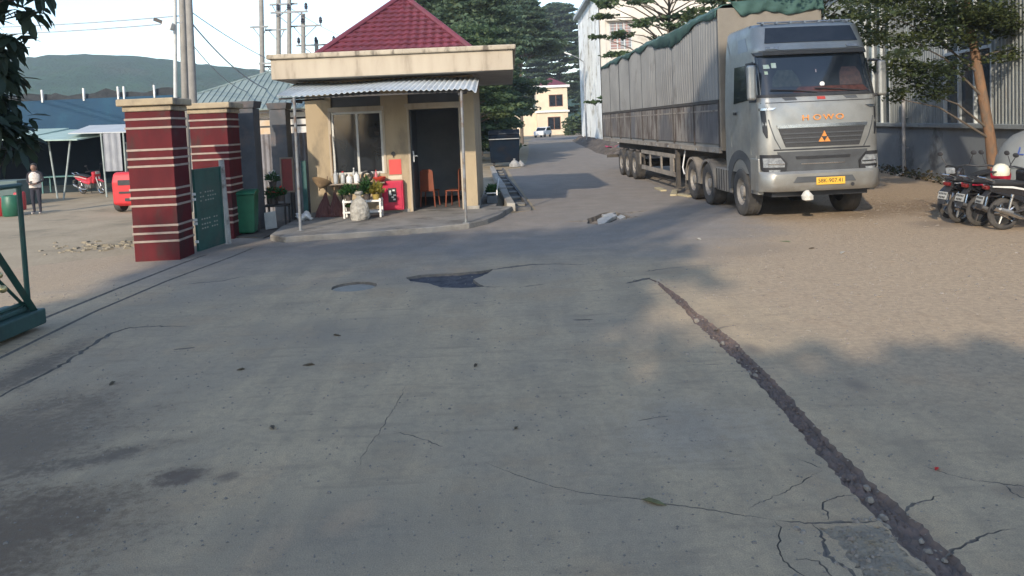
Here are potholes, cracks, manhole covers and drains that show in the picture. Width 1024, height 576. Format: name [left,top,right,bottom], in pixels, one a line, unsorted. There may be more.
crack [356,387,443,470]
pothole [406,269,493,288]
crack [480,267,1024,576]
crack [0,325,185,397]
manhole cover [331,282,377,292]
